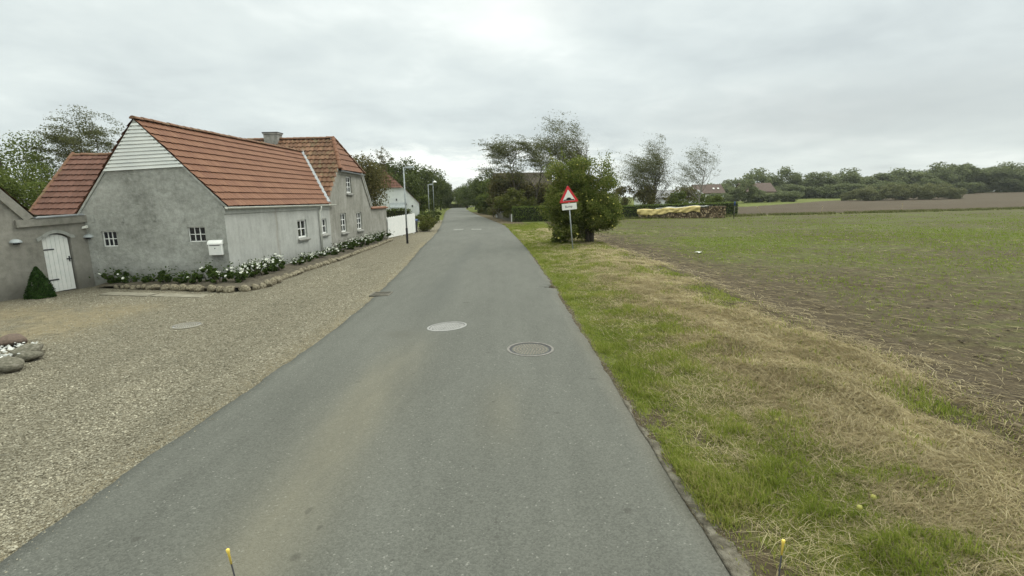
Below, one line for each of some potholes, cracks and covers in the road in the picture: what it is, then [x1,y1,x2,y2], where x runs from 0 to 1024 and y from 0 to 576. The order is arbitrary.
manhole cover [507,342,554,357]
manhole cover [170,322,203,330]
manhole cover [427,322,467,332]
